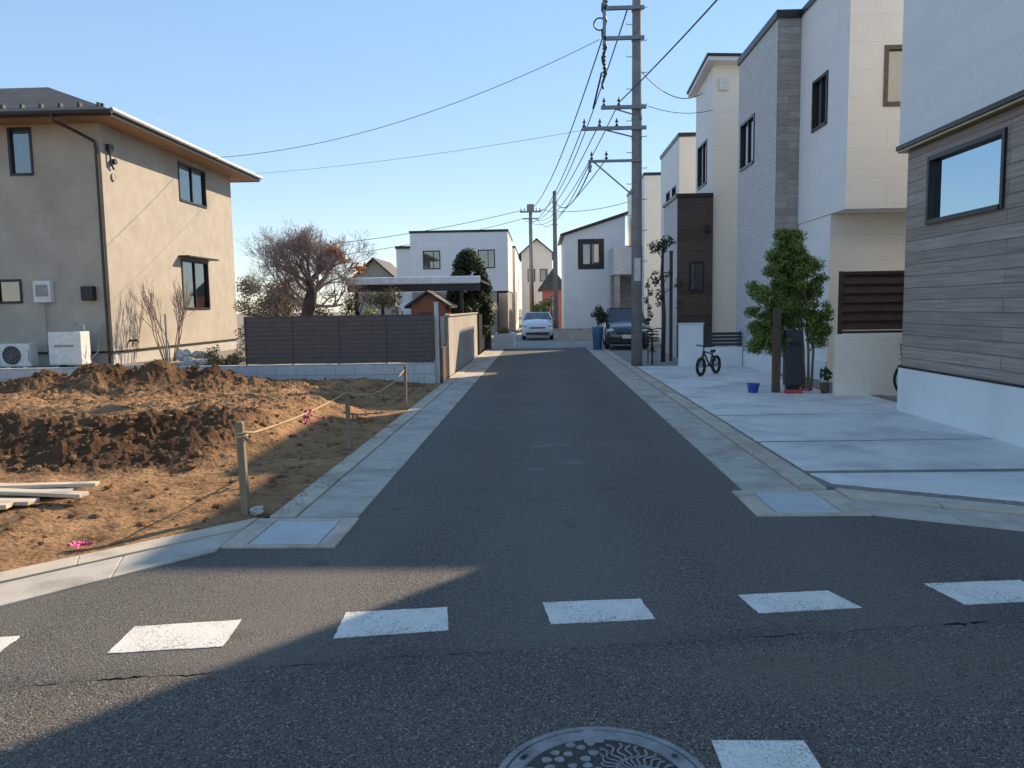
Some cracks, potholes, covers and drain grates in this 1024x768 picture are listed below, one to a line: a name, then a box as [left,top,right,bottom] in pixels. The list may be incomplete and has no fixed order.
manhole cover [499,726,705,768]
crack [34,621,988,686]
